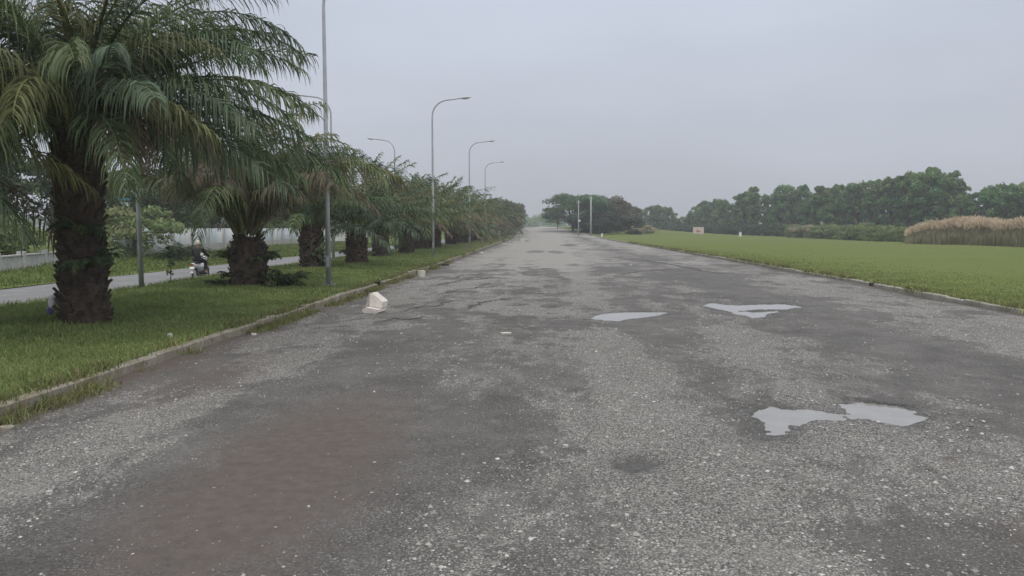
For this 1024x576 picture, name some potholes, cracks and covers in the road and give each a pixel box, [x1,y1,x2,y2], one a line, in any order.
crack [404,273,512,311]
pothole [697,301,811,319]
pothole [577,310,675,322]
